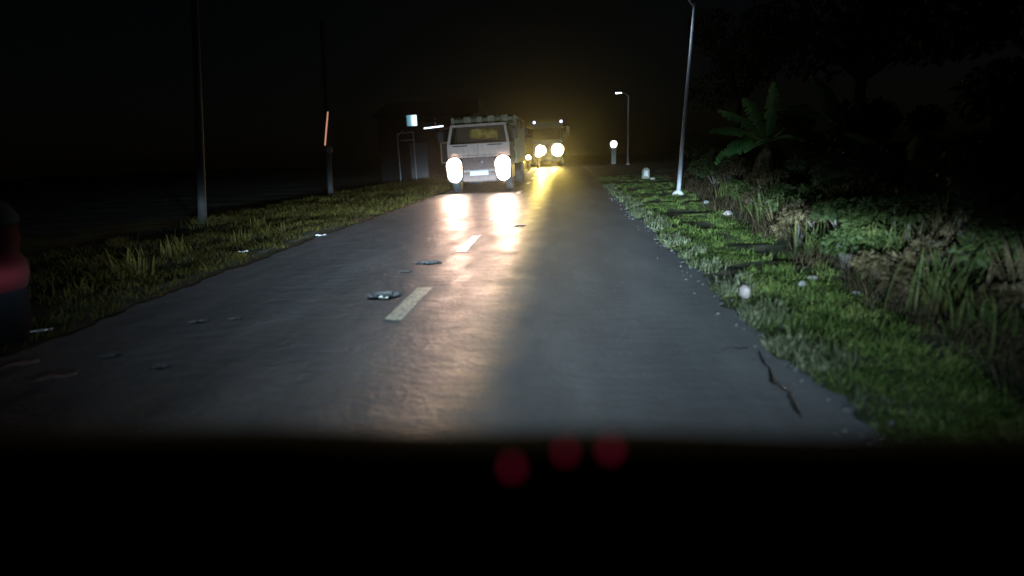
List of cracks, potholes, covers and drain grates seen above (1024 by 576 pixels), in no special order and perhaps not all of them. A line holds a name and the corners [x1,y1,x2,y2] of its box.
pothole [366,291,403,300]
crack [726,347,802,417]
